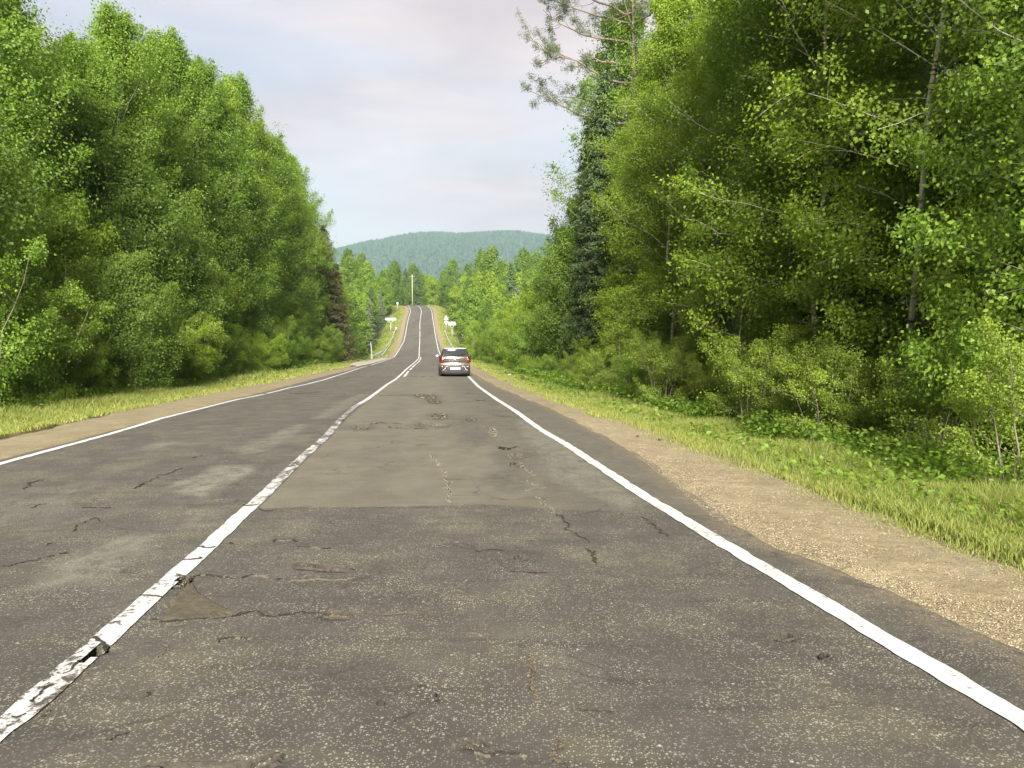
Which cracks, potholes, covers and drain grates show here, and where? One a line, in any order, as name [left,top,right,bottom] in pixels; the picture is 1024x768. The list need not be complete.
crack [152,610,446,623]
crack [466,393,598,564]
crack [0,543,68,566]
crack [182,541,355,582]
pothole [172,573,192,590]
crack [430,455,453,503]
crack [527,653,553,708]
pothole [766,632,798,642]
